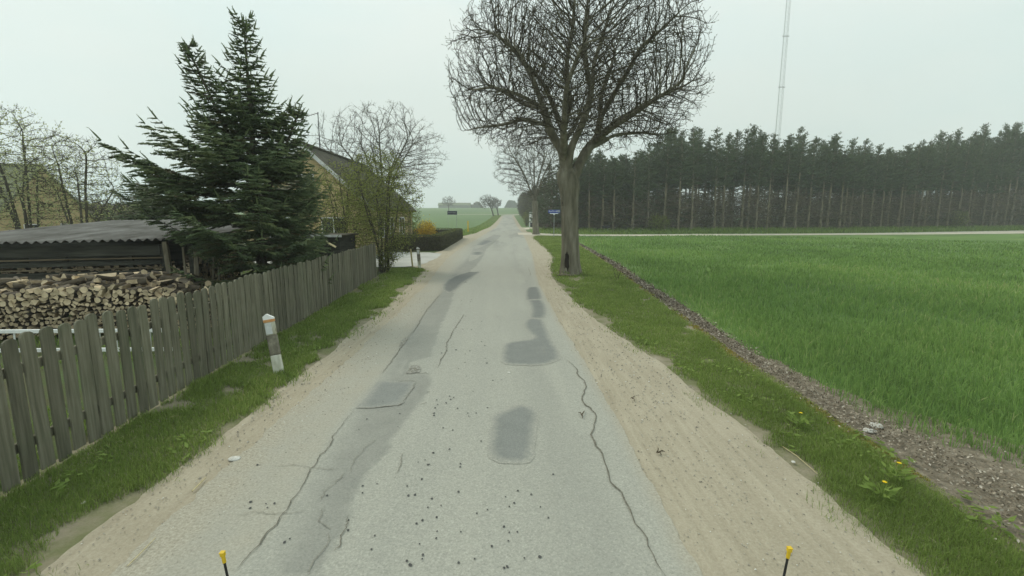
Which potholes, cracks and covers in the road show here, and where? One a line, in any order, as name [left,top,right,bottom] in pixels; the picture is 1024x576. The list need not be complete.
crack [571,363,663,572]
crack [241,443,371,575]
